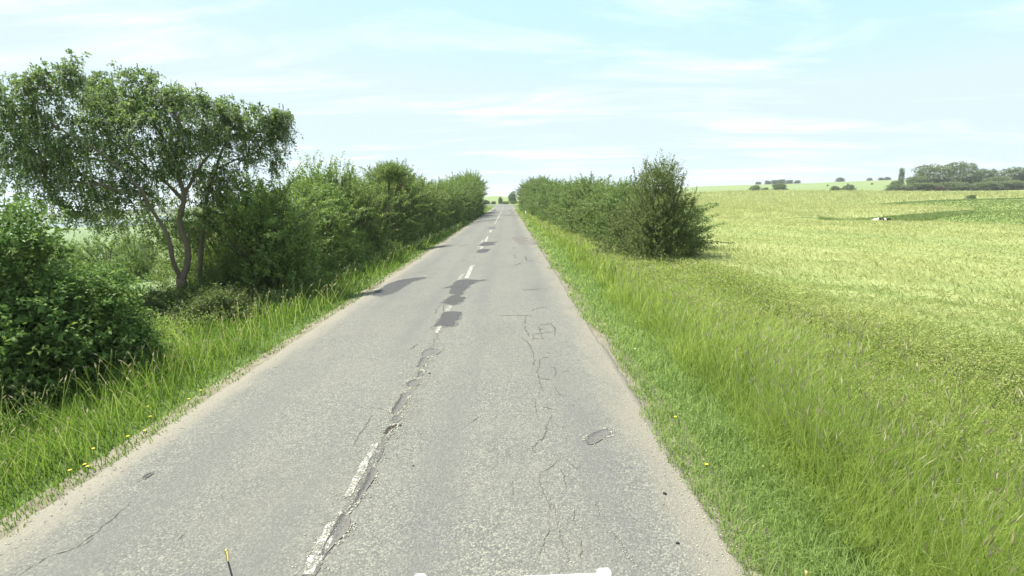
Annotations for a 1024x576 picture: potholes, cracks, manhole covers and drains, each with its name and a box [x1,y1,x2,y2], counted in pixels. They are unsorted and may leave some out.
pothole [388,391,413,415]
pothole [419,348,443,358]
pothole [579,426,616,446]
crack [24,502,131,572]
crack [503,307,637,568]
crack [352,407,384,446]
